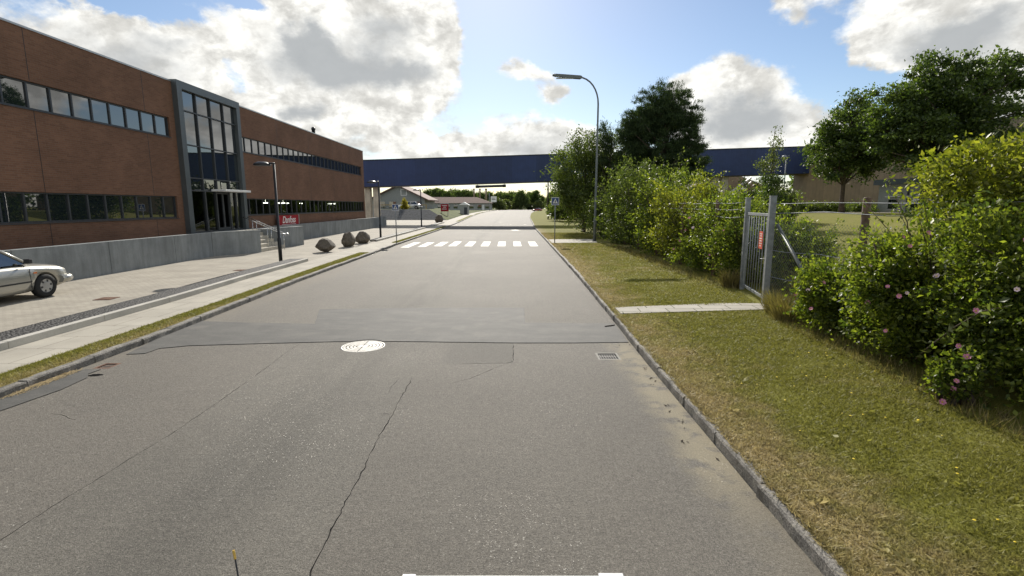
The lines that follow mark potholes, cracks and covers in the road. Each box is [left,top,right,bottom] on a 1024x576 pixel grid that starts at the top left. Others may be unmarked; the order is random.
crack [1,344,299,540]
manhole cover [340,341,385,352]
crack [309,380,411,576]
